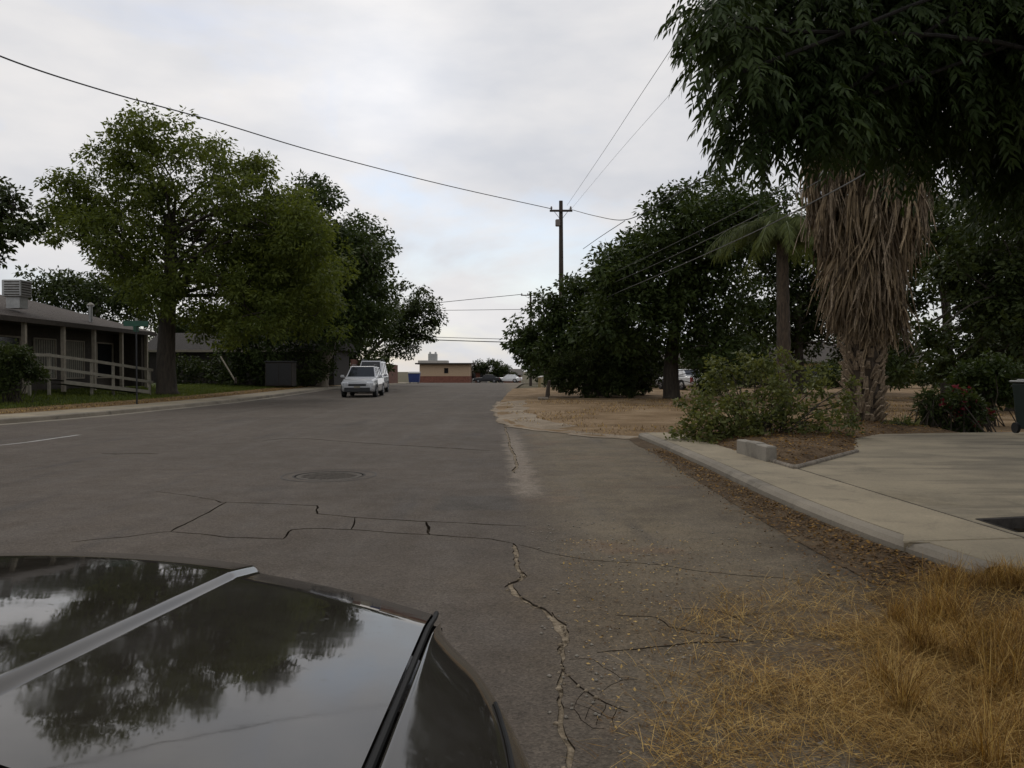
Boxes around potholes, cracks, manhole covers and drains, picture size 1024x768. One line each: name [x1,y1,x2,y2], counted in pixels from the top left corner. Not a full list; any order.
manhole cover [280,469,377,482]
crack [504,543,795,768]
crack [75,491,518,545]
